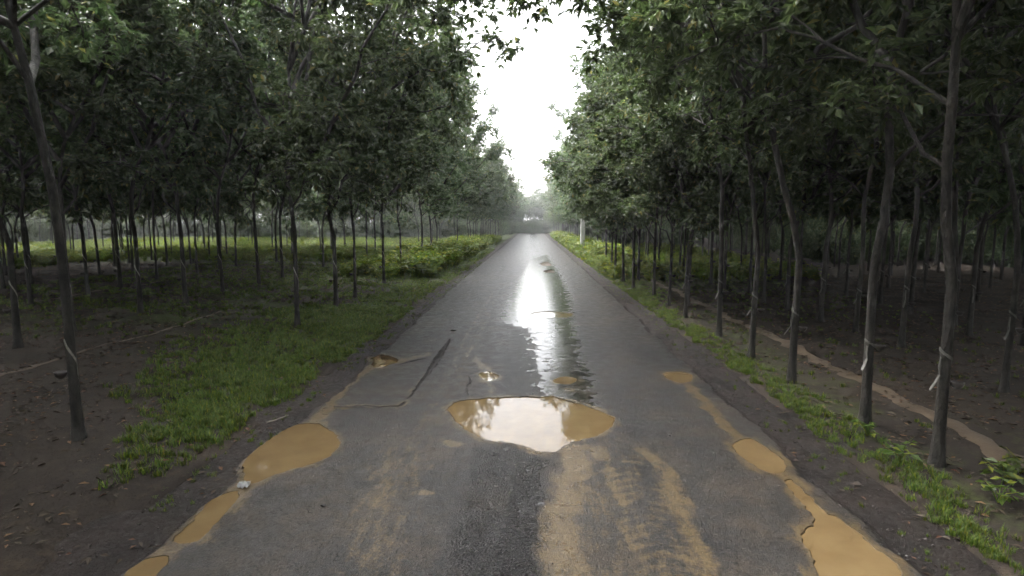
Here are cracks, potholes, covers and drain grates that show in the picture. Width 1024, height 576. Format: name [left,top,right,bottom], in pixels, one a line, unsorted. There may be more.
crack [329,339,475,409]
pothole [547,375,582,386]
pothole [726,436,794,476]
pothole [473,370,504,383]
pothole [657,370,699,384]
pothole [442,395,620,454]
pothole [122,551,178,576]
pothole [366,353,403,369]
pothole [778,476,912,576]
